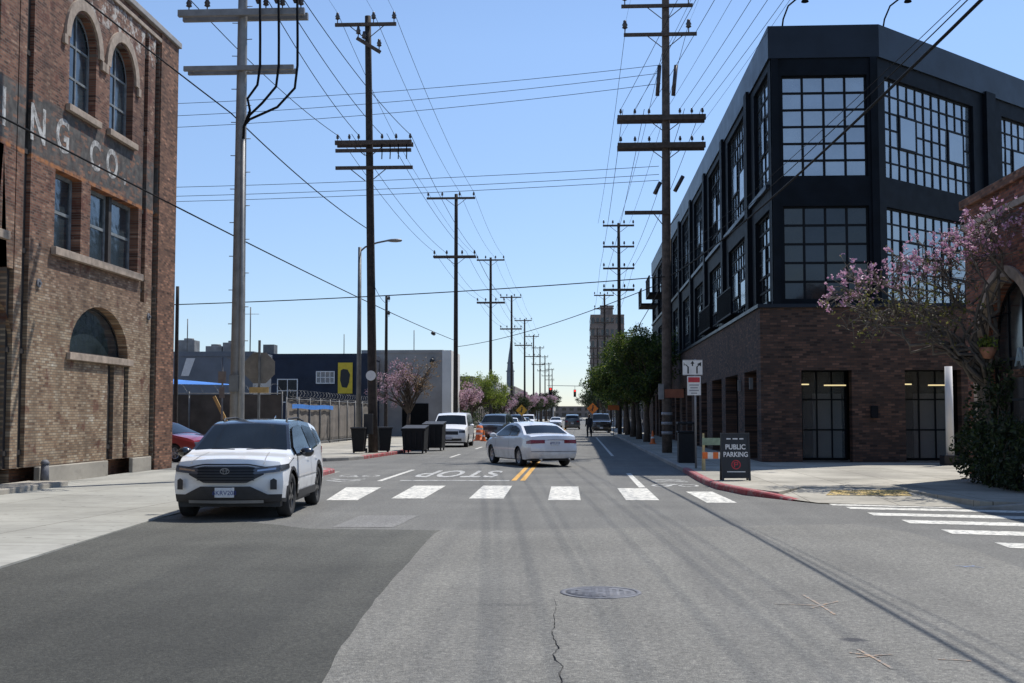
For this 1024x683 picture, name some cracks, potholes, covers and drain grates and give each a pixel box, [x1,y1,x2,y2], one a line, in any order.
manhole cover [560,586,642,599]
crack [551,602,564,683]
